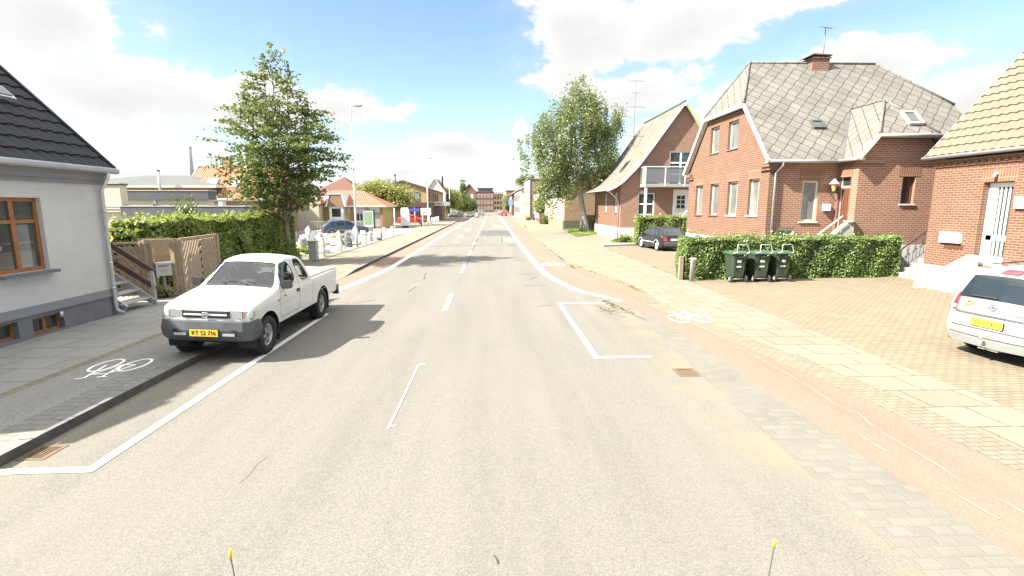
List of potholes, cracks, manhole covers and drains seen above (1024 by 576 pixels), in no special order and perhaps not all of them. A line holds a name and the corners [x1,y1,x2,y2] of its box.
drain grate [671,368,702,377]
drain grate [14,445,69,461]
